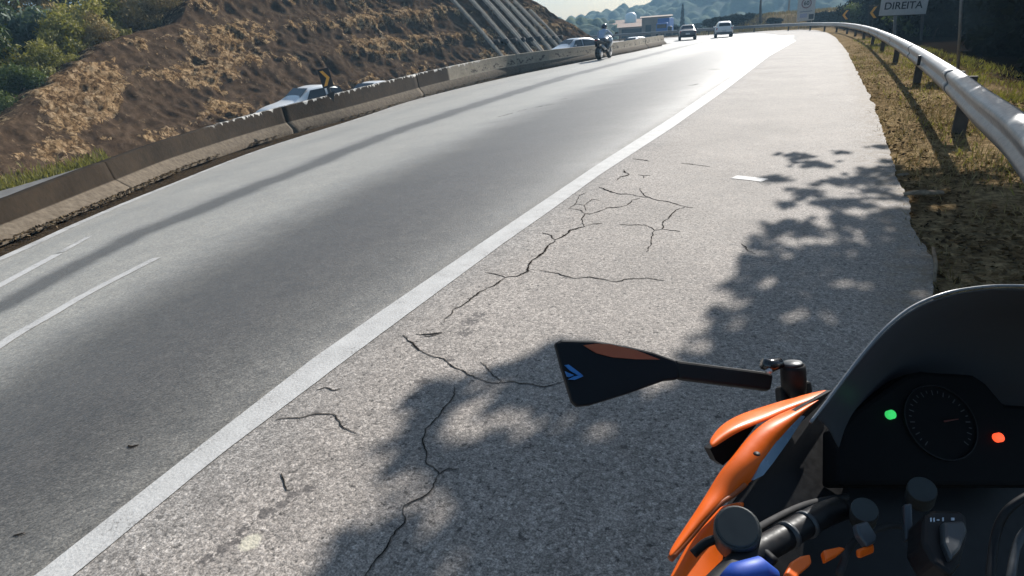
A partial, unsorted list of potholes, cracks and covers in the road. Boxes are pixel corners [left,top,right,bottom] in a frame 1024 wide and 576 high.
crack [276,159,693,576]
